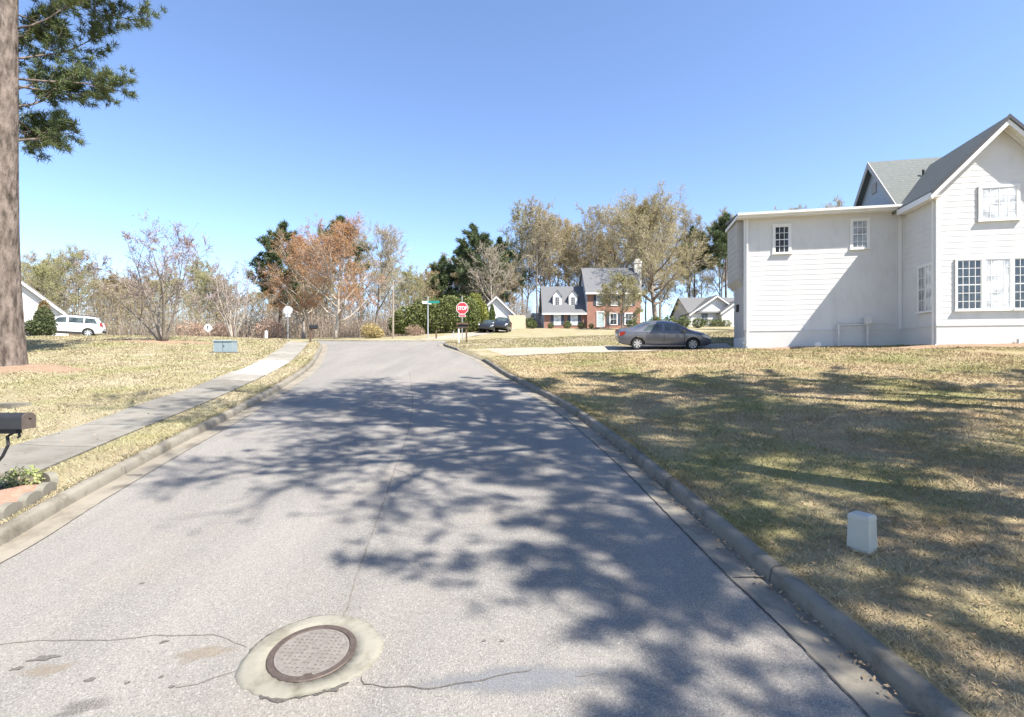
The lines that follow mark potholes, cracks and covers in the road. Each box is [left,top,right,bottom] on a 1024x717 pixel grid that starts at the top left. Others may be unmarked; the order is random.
manhole cover [234,615,384,703]
crack [361,669,532,689]
crack [0,634,246,647]
